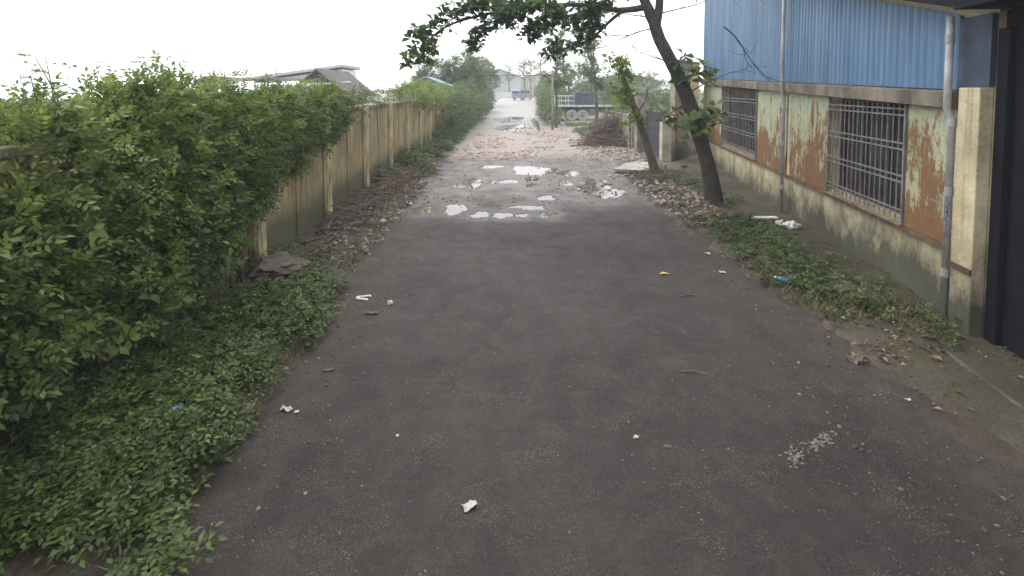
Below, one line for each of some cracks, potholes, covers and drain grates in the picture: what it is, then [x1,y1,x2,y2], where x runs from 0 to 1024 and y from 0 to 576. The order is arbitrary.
pothole [444,203,469,216]
pothole [452,178,483,189]
pothole [512,165,559,176]
pothole [494,124,531,132]
pothole [576,178,626,199]
